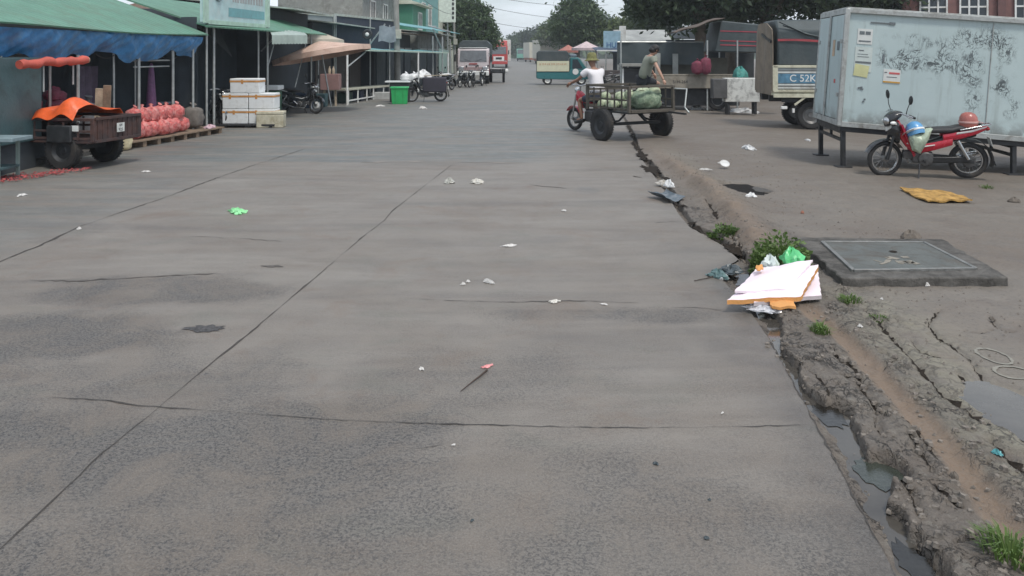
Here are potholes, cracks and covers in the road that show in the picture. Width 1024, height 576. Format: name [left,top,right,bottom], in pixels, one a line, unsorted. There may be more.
manhole cover [795,237,1008,287]
pothole [891,537,936,576]
pothole [852,457,904,492]
crack [627,126,670,180]
pothole [811,403,849,429]
pothole [724,184,765,195]
